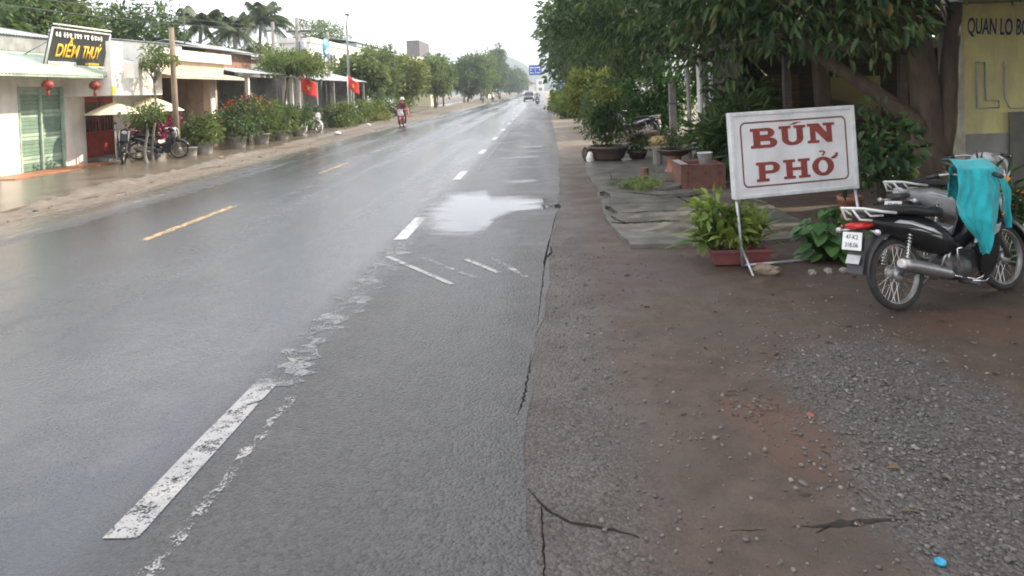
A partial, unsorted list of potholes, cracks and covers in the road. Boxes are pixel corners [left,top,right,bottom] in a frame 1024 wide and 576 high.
crack [537,213,556,325]
crack [528,488,639,576]
crack [517,358,531,415]
crack [792,518,911,533]
